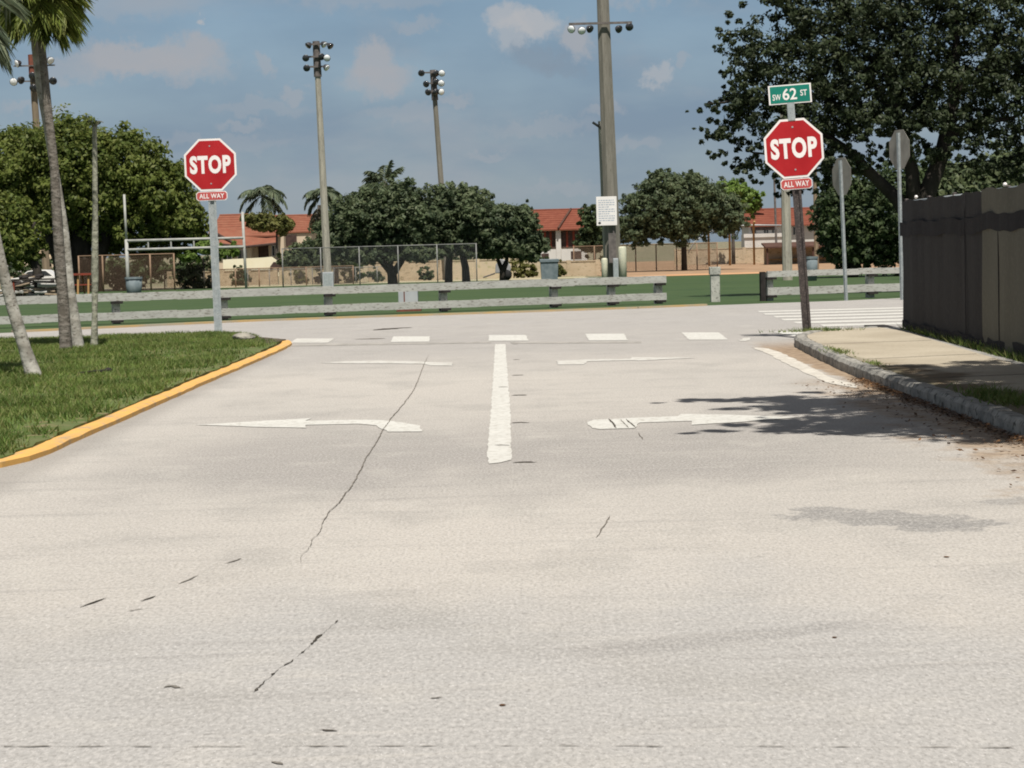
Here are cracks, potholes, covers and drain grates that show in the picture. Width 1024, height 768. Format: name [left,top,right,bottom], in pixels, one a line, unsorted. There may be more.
crack [254,620,338,691]
crack [300,361,426,559]
